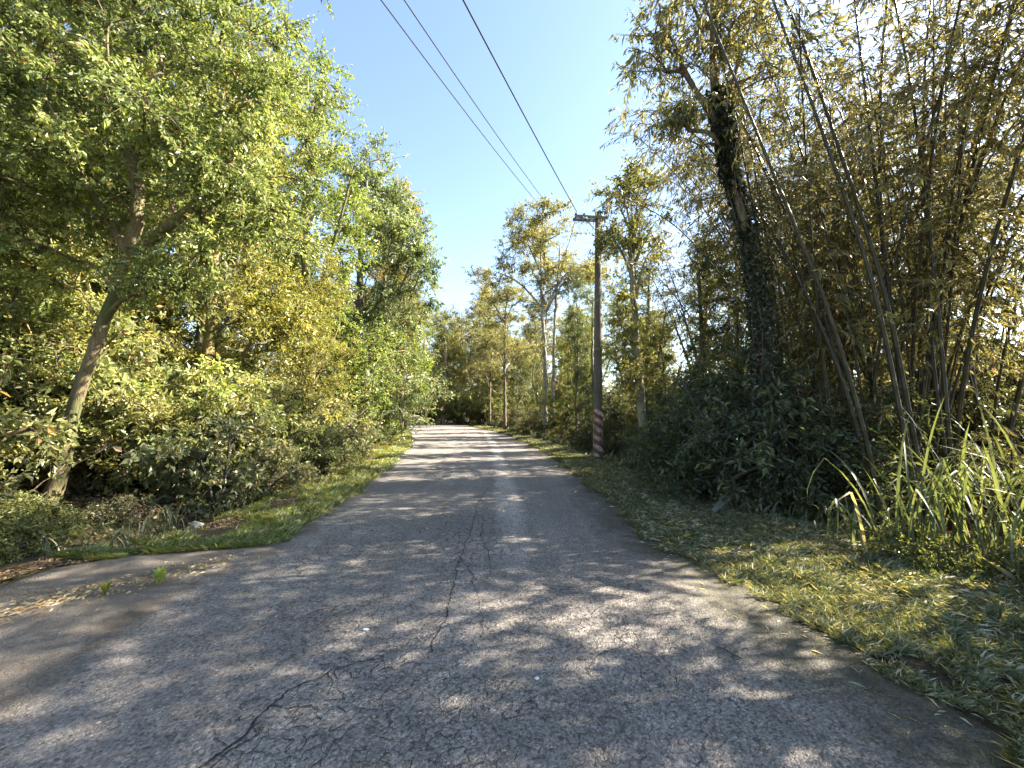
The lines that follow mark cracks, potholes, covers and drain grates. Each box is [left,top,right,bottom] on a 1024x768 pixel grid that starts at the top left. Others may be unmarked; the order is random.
crack [198,492,538,768]
